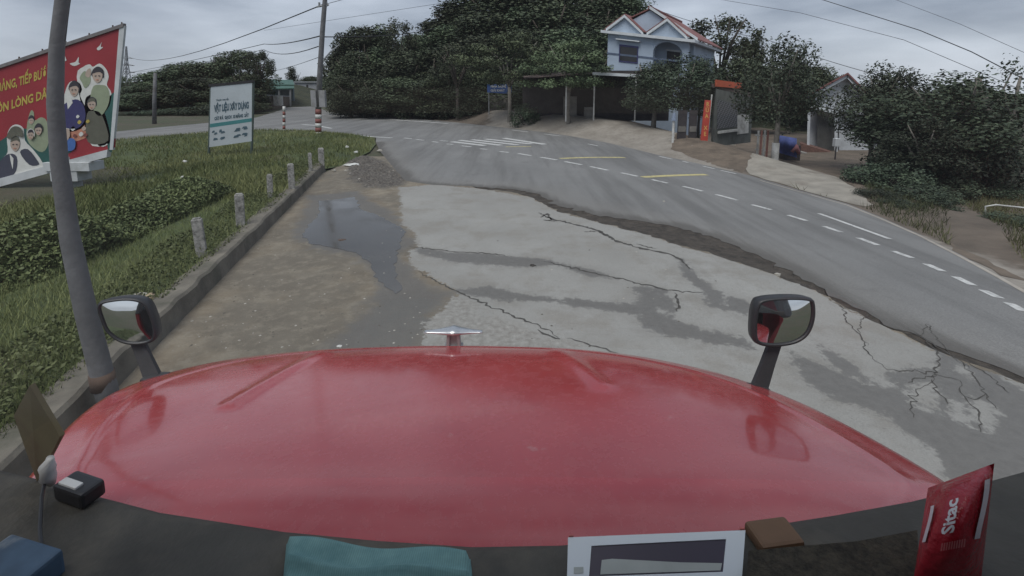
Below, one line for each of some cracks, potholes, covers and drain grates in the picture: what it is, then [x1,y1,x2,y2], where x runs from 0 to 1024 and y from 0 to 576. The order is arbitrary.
crack [410,187,1024,432]
